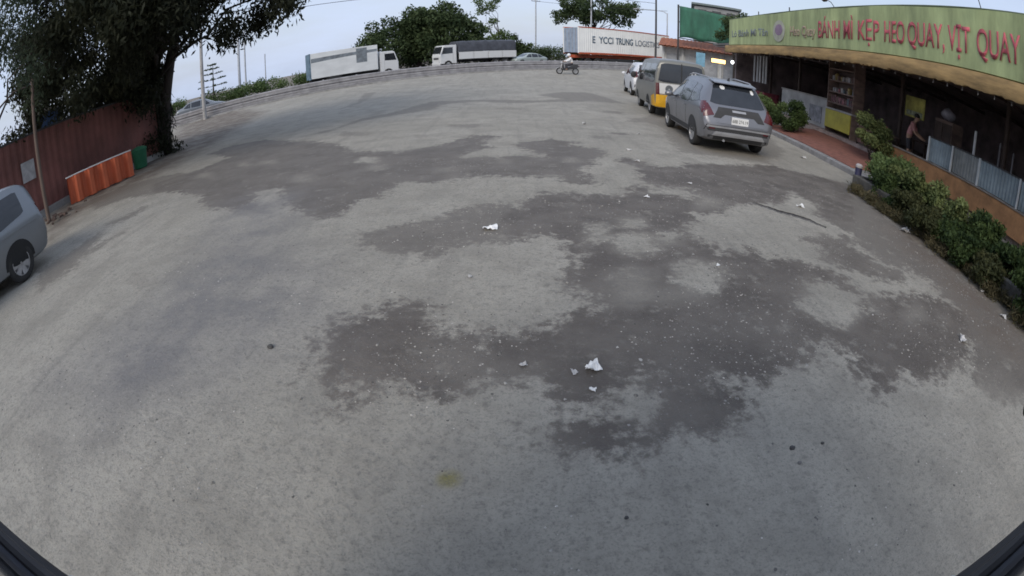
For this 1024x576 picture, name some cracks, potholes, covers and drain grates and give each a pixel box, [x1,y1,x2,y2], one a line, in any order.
crack [753,202,826,228]
